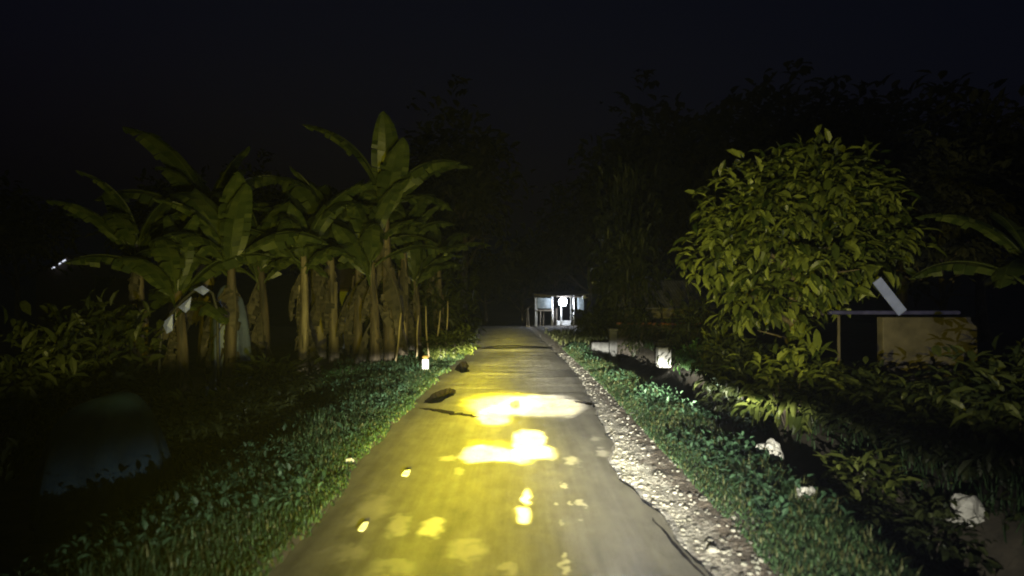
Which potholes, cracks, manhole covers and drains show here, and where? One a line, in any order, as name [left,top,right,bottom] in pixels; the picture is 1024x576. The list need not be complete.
pothole [454,361,470,373]
crack [420,408,479,417]
pothole [424,388,456,404]
